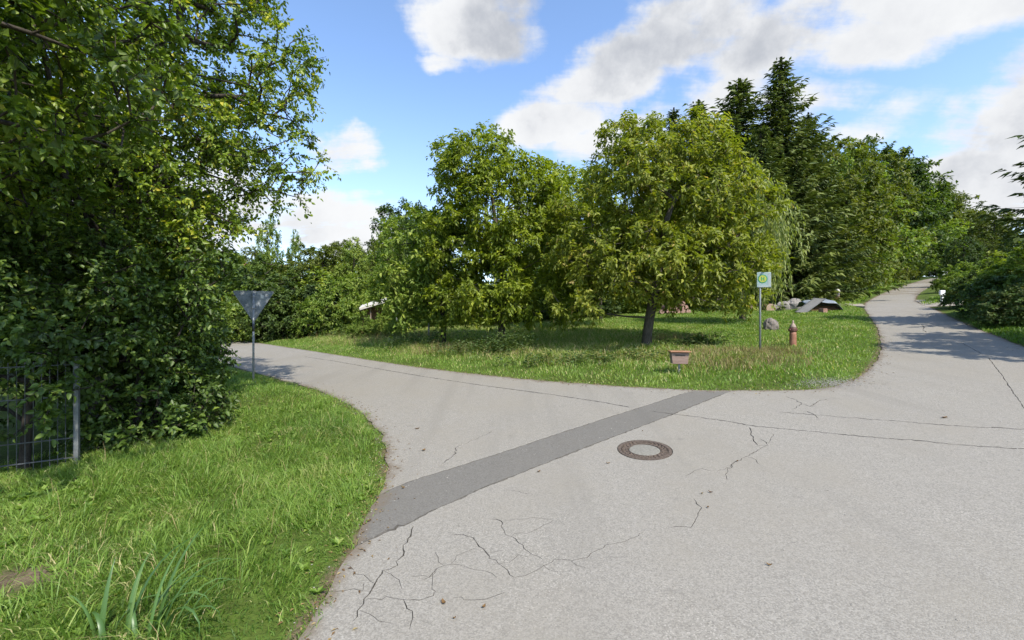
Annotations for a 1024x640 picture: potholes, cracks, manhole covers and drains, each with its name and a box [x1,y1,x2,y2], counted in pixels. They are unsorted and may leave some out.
crack [654,397,1024,478]
manhole cover [617,440,673,460]
crack [329,517,640,626]
